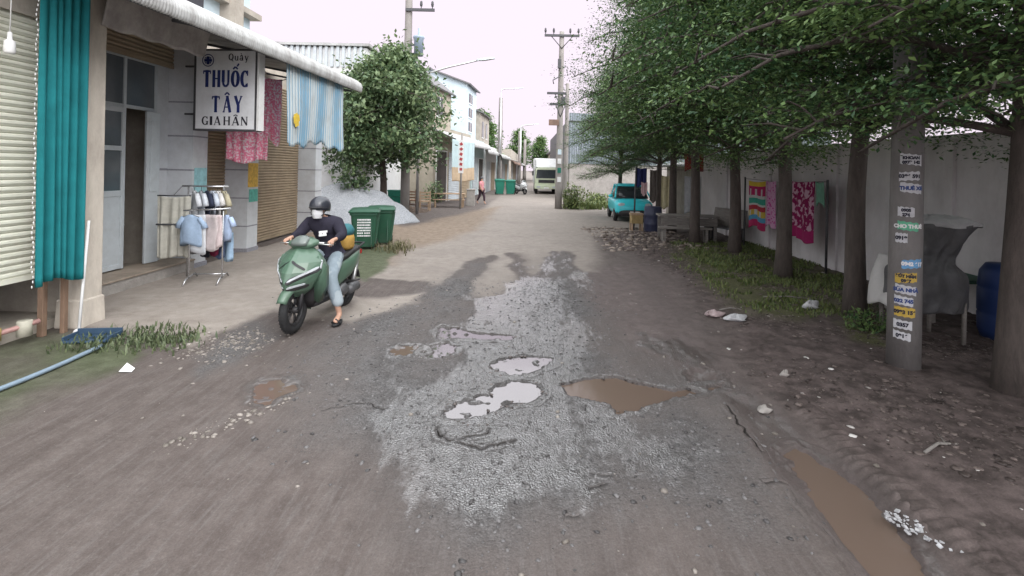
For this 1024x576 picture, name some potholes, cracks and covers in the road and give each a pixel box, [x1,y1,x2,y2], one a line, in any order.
pothole [428,376,554,425]
crack [720,402,857,576]
pothole [238,373,312,412]
pothole [477,352,563,380]
crack [320,400,388,413]
pothole [548,372,734,421]
pothole [413,339,470,362]
pothole [379,341,435,361]
pothole [426,323,522,343]
